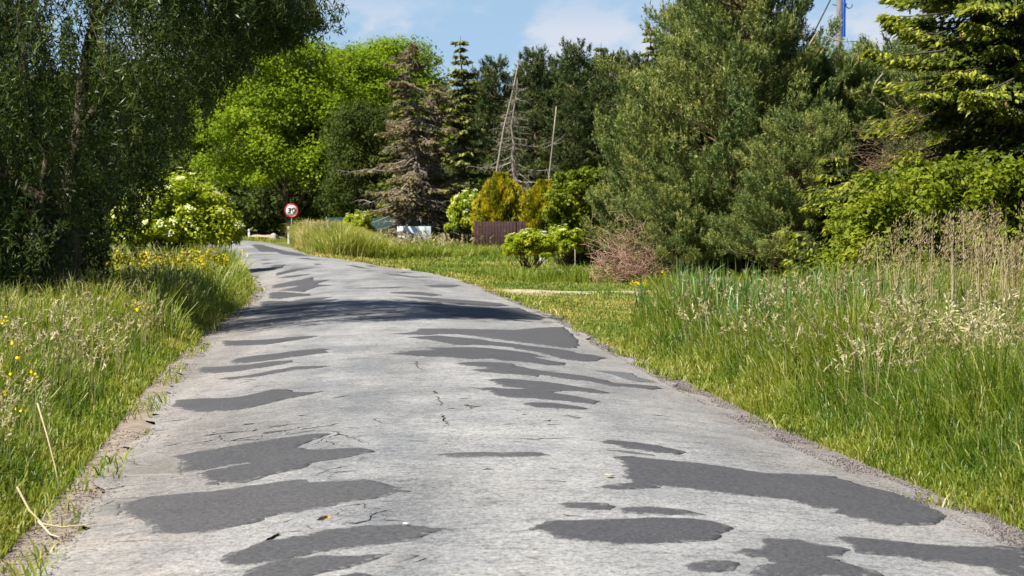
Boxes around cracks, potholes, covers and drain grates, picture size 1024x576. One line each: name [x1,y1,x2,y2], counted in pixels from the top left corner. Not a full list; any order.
crack [336,503,405,524]
crack [157,415,380,451]
